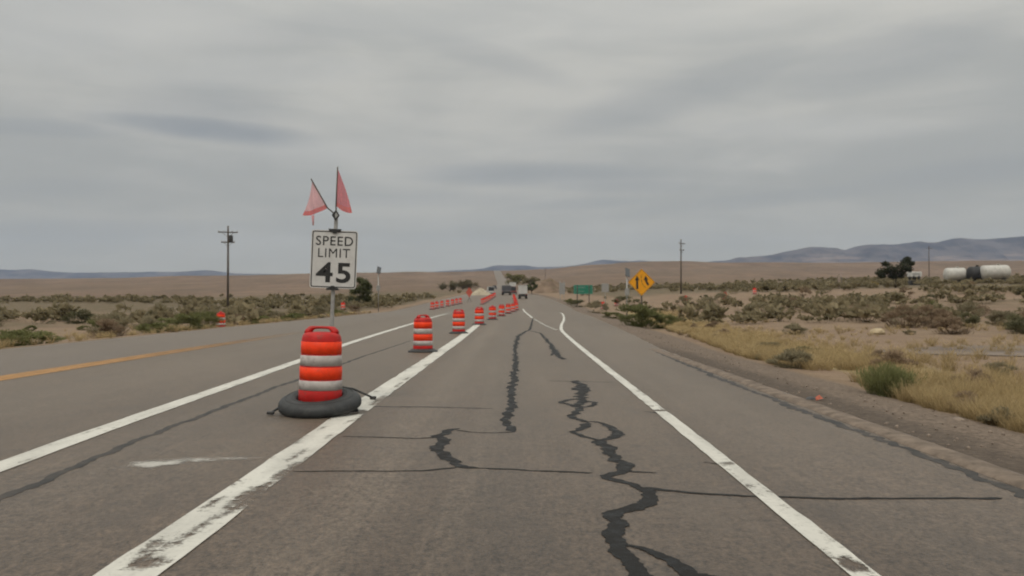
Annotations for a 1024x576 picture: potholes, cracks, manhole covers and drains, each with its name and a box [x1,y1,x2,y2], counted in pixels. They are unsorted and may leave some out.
crack [644,352,1024,498]
